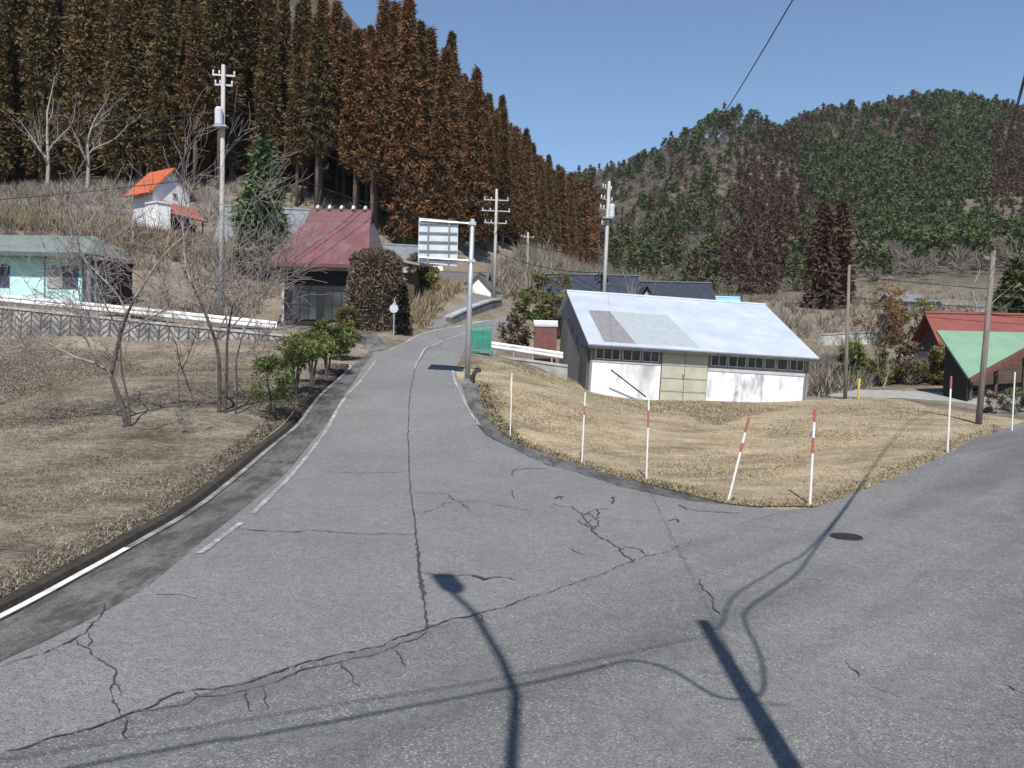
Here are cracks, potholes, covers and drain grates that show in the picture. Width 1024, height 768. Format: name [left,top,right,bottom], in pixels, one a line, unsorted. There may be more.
crack [0,540,691,752]
crack [417,468,529,513]
manhole cover [829,533,863,541]
crack [699,579,721,614]
crack [554,496,644,562]
